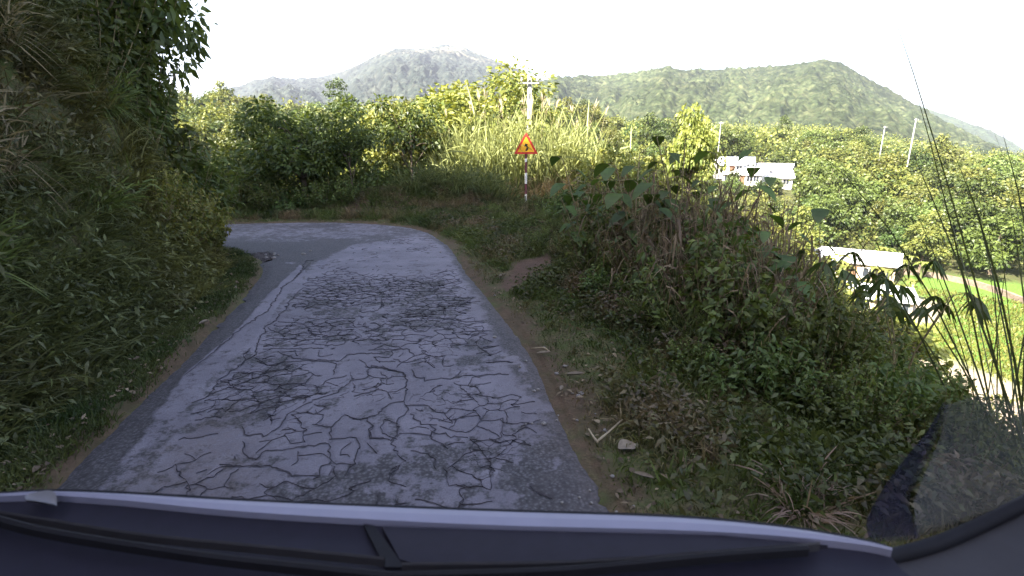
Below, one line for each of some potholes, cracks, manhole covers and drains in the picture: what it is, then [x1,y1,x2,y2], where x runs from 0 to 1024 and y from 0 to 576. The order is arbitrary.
crack [153,238,541,508]
pothole [251,251,273,265]
